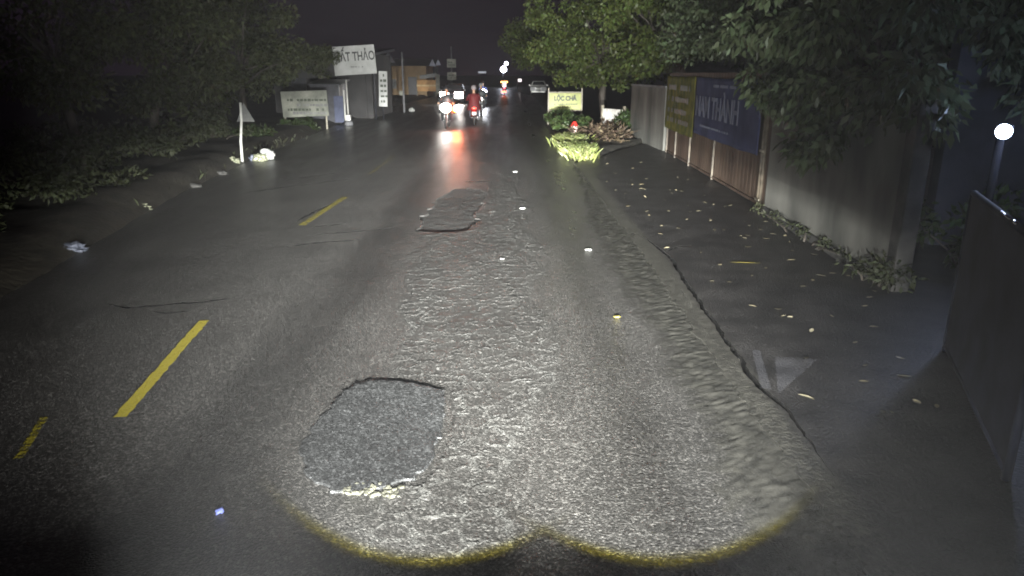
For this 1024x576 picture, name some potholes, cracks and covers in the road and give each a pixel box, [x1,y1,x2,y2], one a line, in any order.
crack [109,297,234,313]
